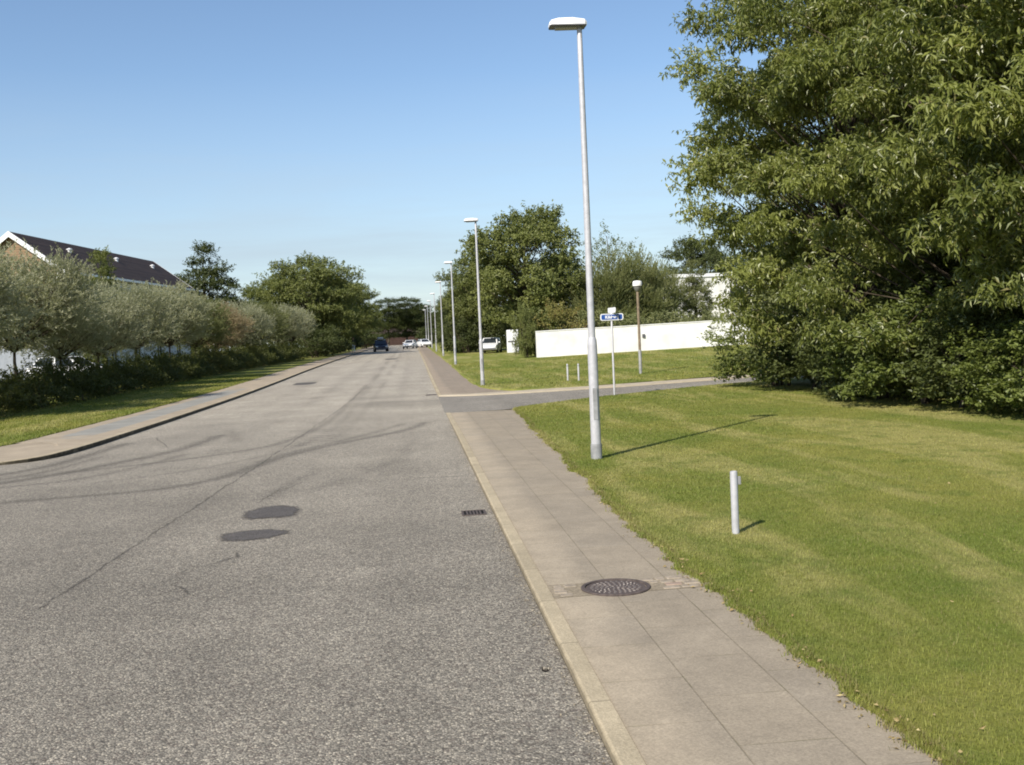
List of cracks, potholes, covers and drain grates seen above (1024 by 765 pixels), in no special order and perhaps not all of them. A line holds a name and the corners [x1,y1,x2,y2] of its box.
manhole cover [581,578,651,597]
